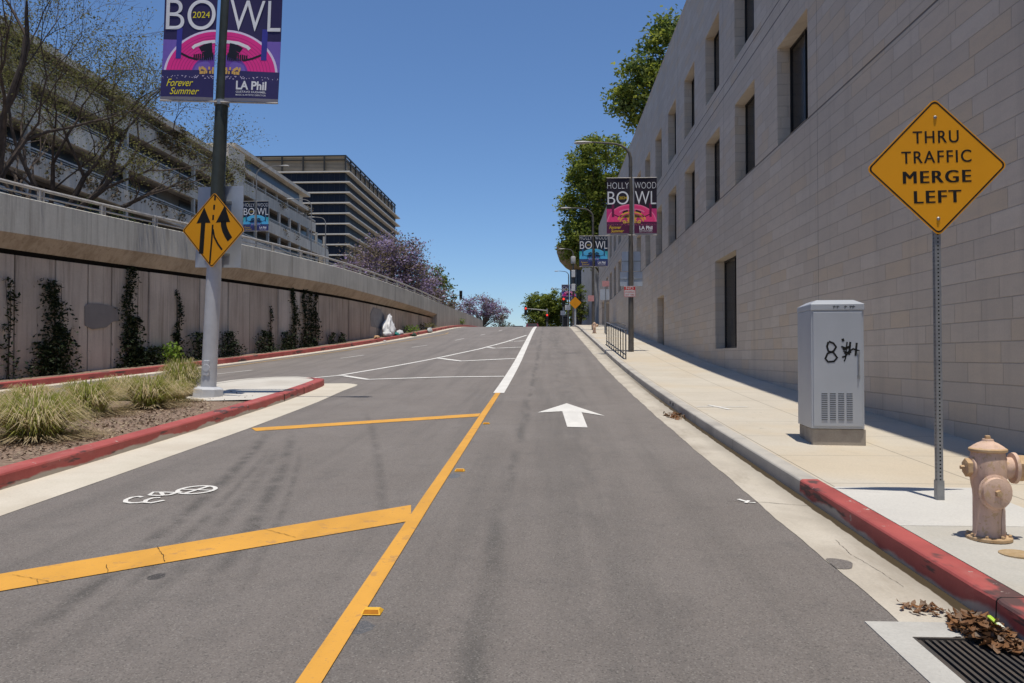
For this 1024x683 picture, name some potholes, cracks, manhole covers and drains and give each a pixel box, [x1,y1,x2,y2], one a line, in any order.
drain grate [865,621,1024,683]
utility cover [998,549,1024,559]
